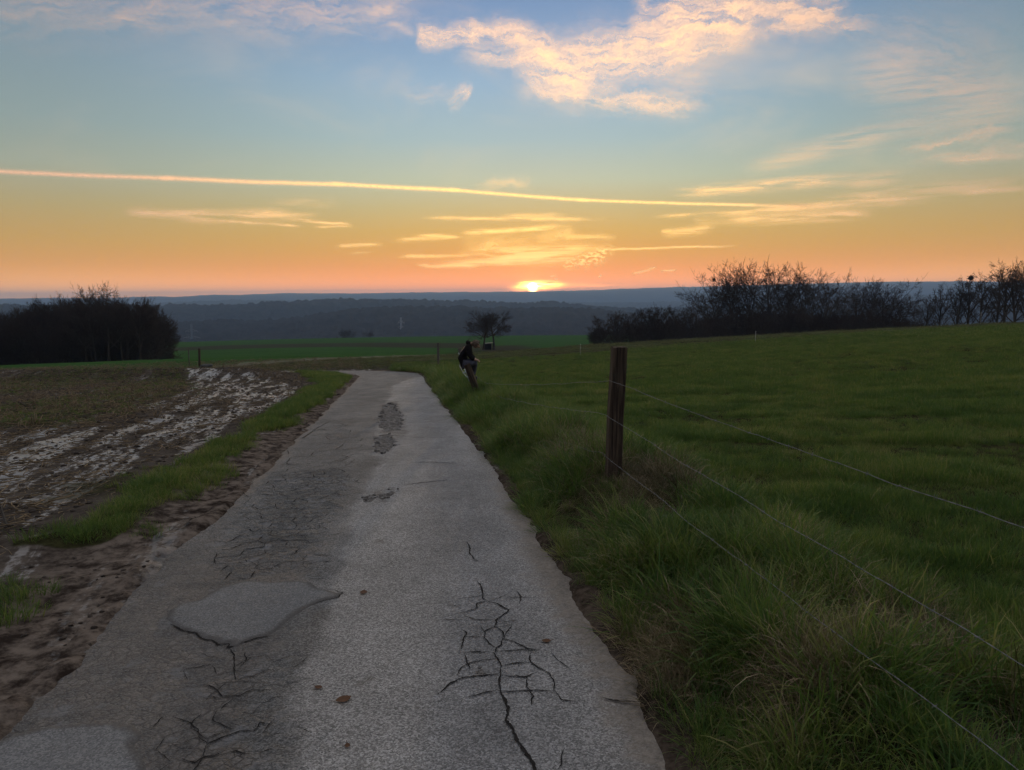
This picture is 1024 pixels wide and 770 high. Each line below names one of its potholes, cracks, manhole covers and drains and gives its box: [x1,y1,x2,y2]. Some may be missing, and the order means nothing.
crack [154,624,312,770]
pothole [373,433,400,454]
pothole [376,402,407,432]
crack [214,418,363,602]
crack [437,582,573,770]
